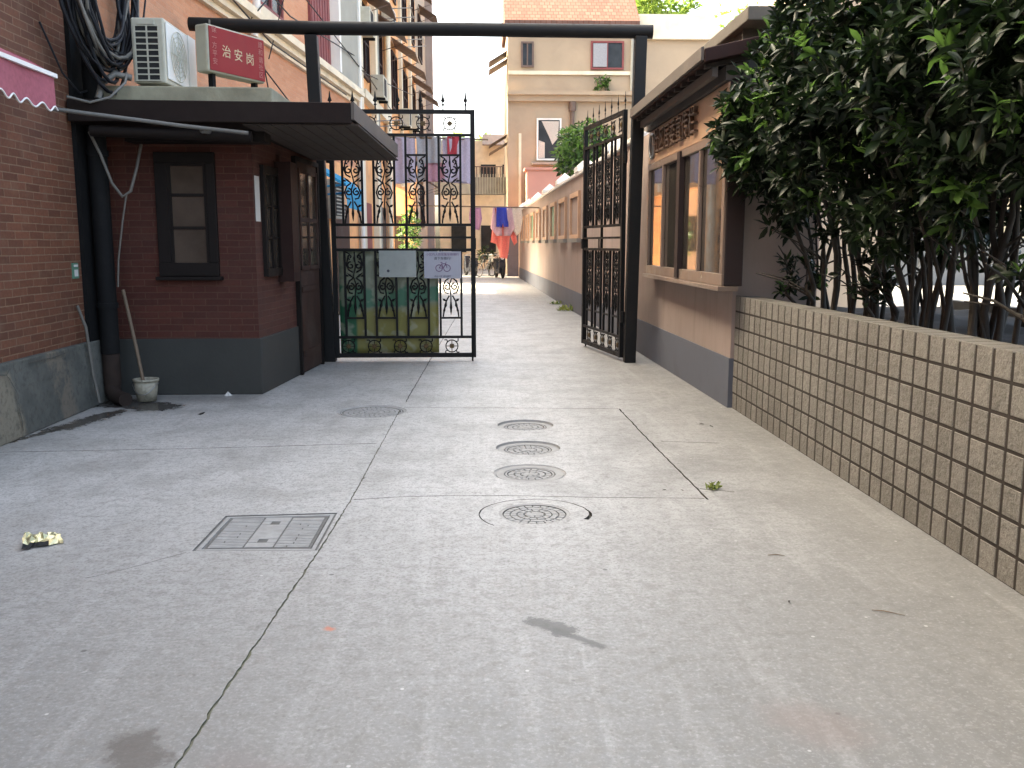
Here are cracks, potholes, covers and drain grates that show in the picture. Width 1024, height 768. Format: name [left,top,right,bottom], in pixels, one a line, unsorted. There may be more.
manhole cover [496,441,560,455]
manhole cover [498,420,553,431]
manhole cover [499,503,570,524]
manhole cover [493,464,566,482]
manhole cover [336,405,407,418]
